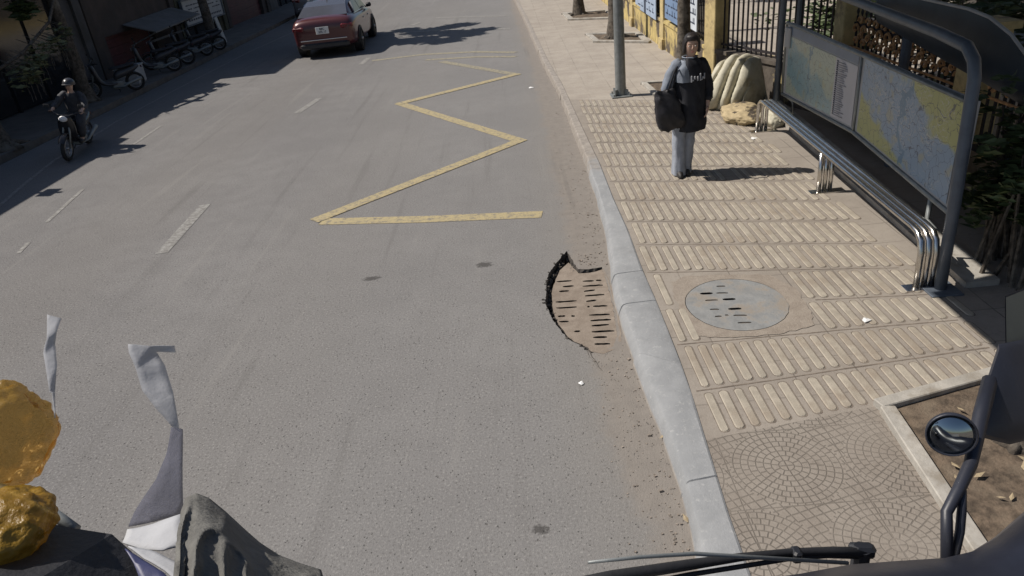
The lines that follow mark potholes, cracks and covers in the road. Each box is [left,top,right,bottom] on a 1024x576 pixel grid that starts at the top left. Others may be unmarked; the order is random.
drain grate [552,263,621,354]
manhole cover [671,274,814,338]
